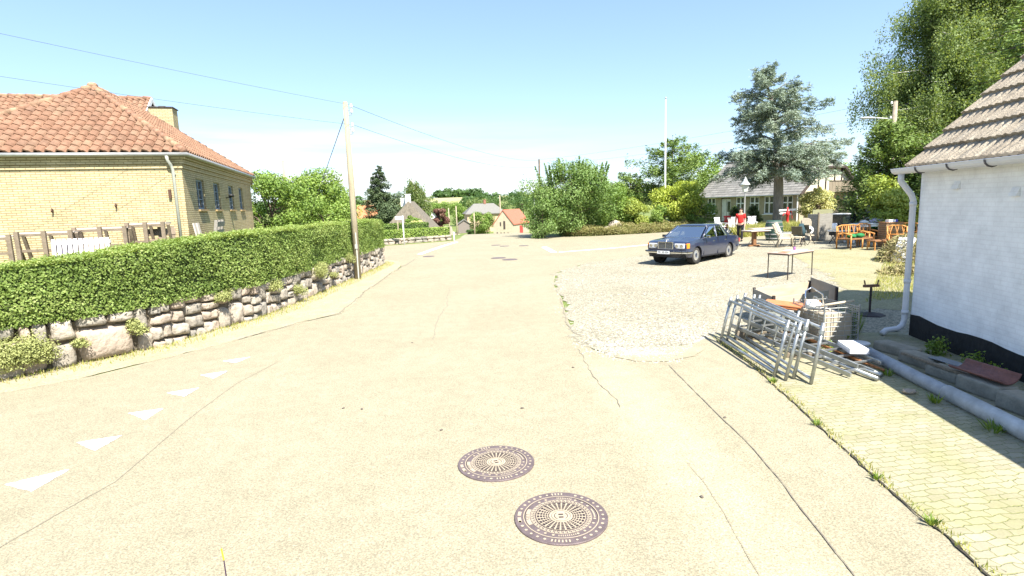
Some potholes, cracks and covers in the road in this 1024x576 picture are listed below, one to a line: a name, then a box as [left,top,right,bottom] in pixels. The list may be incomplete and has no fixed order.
crack [560,301,620,406]
crack [686,461,760,575]
manhole cover [514,492,608,546]
manhole cover [458,446,534,482]
